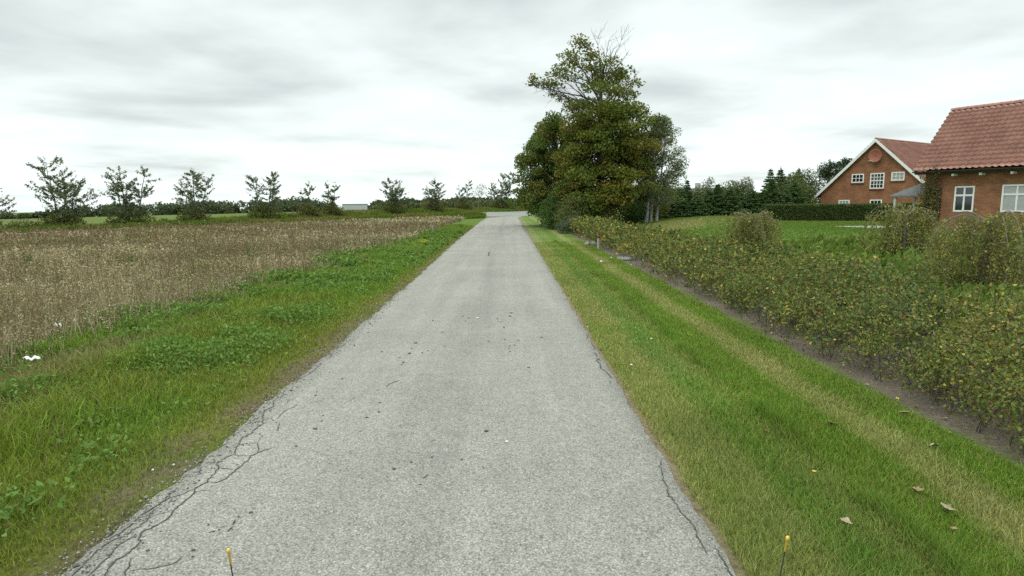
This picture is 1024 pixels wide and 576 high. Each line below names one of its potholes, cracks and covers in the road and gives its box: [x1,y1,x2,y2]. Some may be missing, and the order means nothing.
crack [655,442,733,576]
crack [71,393,321,576]
